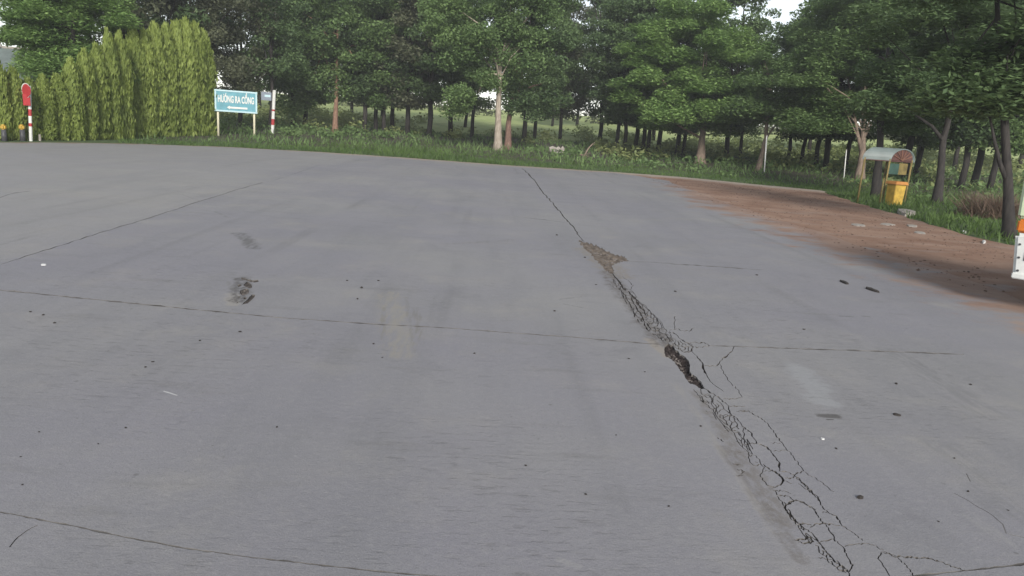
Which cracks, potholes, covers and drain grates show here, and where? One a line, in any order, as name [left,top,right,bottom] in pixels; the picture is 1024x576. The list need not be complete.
crack [1,170,1024,576]
pothole [664,344,704,389]
pothole [237,278,259,305]
